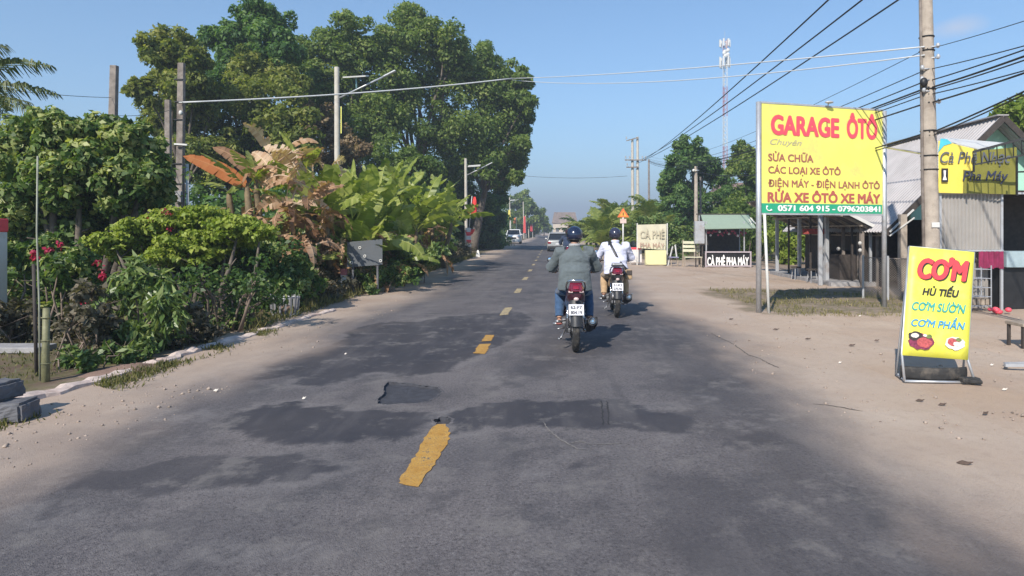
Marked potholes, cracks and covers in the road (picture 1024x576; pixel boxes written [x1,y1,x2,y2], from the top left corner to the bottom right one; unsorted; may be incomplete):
crack [543,422,615,449]
pothole [376,381,444,405]
